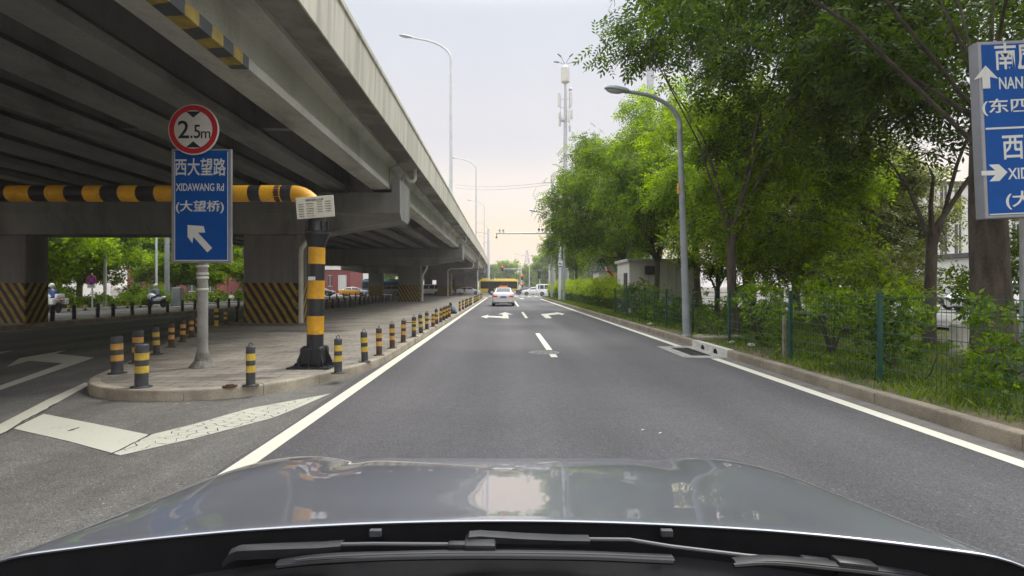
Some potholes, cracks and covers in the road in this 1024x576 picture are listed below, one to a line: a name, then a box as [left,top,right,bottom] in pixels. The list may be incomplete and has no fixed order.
drain grate [692,340,733,357]
